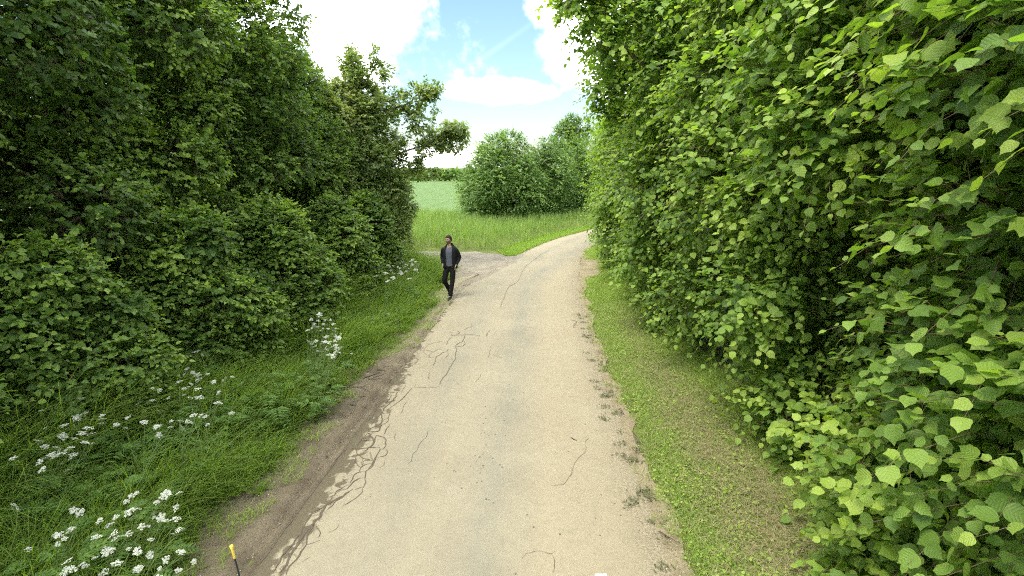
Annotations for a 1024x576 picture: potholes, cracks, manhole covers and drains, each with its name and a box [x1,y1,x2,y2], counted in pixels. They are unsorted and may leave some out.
crack [274,327,502,573]
